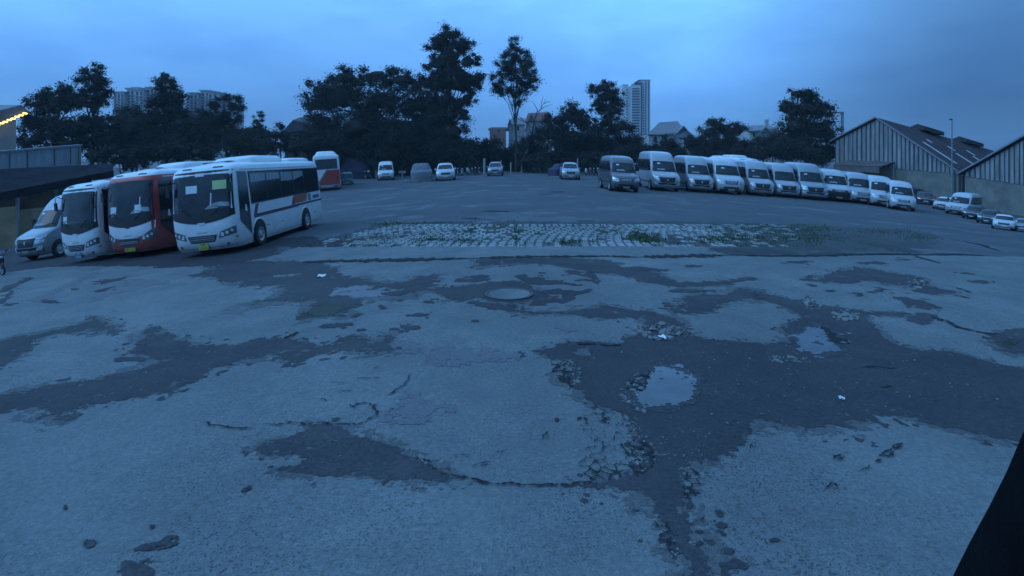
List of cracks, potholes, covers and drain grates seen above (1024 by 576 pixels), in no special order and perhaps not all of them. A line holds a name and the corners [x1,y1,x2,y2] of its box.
crack [269,366,411,425]
crack [931,316,996,334]
crack [416,402,655,486]
manhole cover [485,288,533,300]
